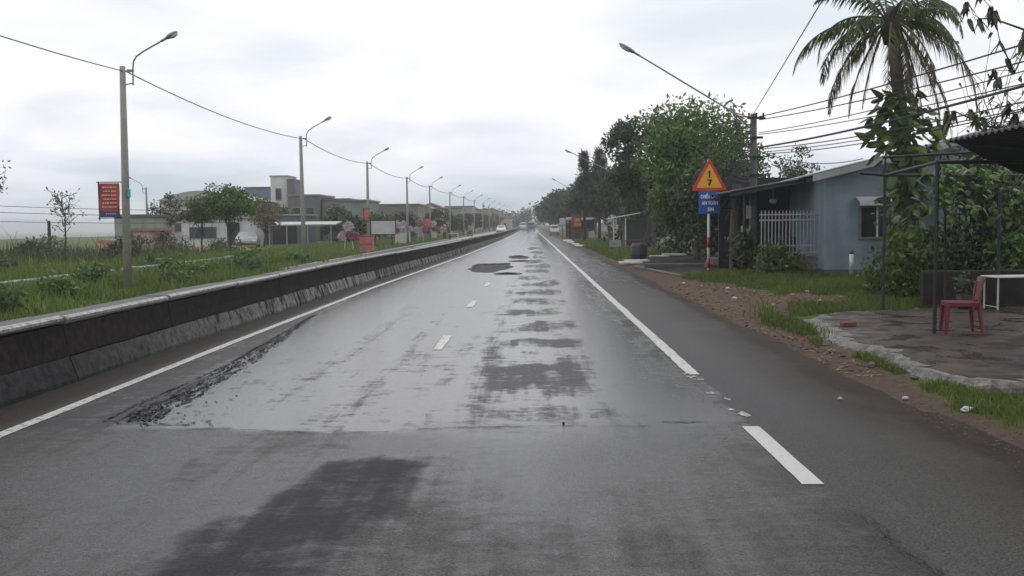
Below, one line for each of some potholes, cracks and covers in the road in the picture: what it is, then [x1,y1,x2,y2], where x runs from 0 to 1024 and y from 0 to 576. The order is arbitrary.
crack [102,314,703,432]
crack [854,512,944,576]
pothole [468,263,514,273]
